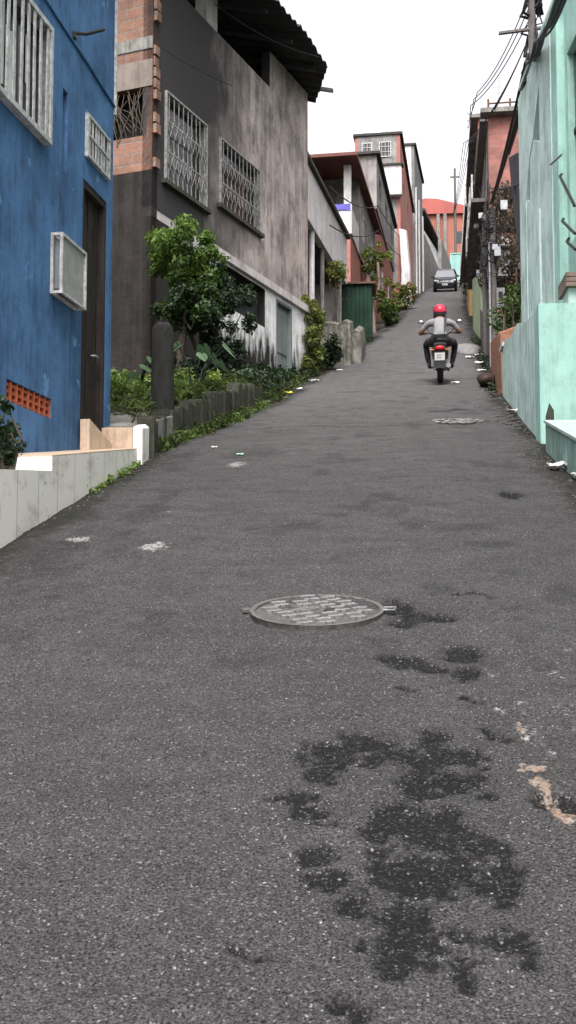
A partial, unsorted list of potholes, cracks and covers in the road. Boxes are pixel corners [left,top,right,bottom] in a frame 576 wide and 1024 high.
pothole [374,644,487,685]
pothole [278,726,543,996]
pothole [496,490,525,500]
pothole [378,598,459,629]
manhole cover [242,594,397,631]
